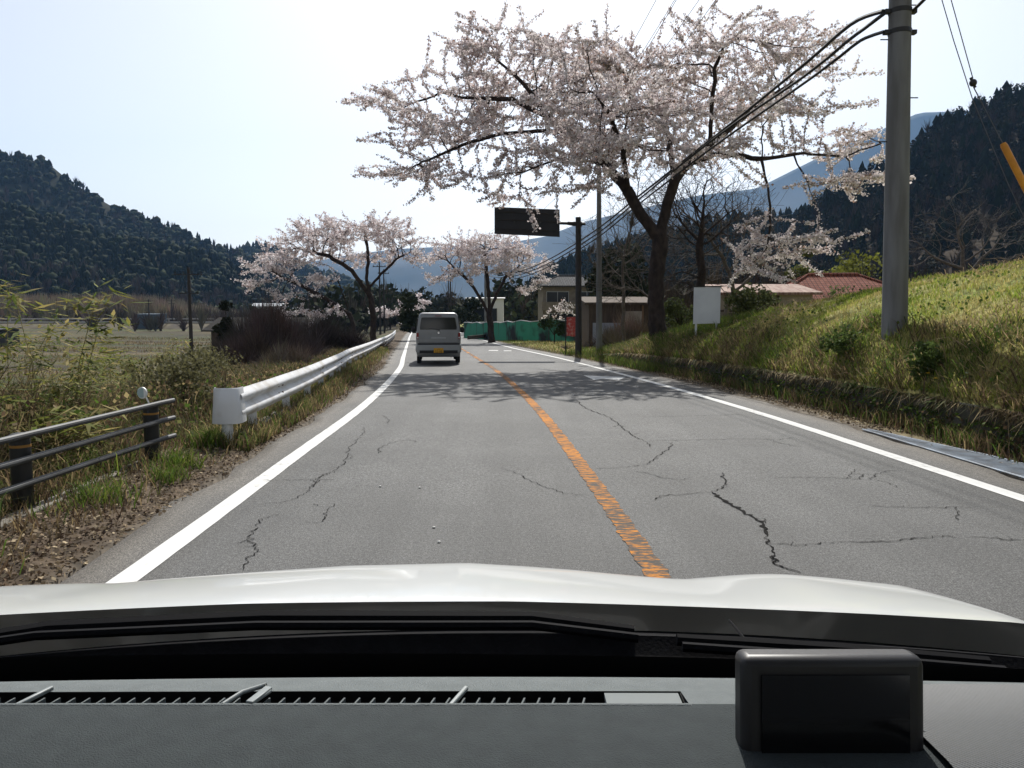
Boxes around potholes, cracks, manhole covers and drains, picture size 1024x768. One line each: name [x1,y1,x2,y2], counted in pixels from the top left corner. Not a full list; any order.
crack [575,400,800,572]
crack [766,505,1014,545]
crack [276,420,413,523]
crack [237,514,278,570]
